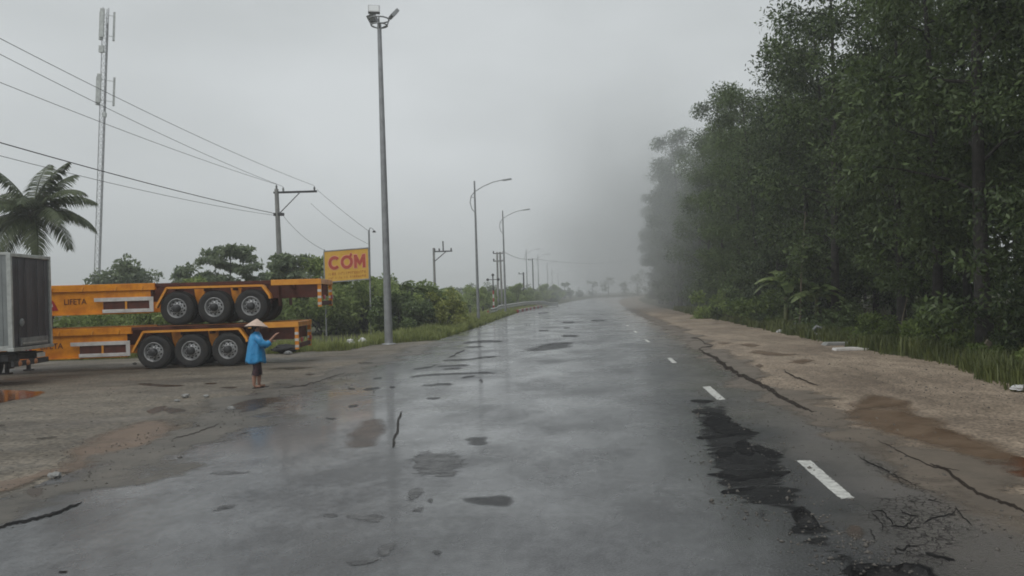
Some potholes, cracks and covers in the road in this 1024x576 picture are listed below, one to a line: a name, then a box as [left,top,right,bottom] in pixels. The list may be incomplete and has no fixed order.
crack [859,441,1024,563]
crack [393,411,402,448]
pothole [791,506,820,529]
crack [695,338,817,412]
crack [284,362,372,388]
crack [0,502,82,528]
pothole [842,562,937,576]
